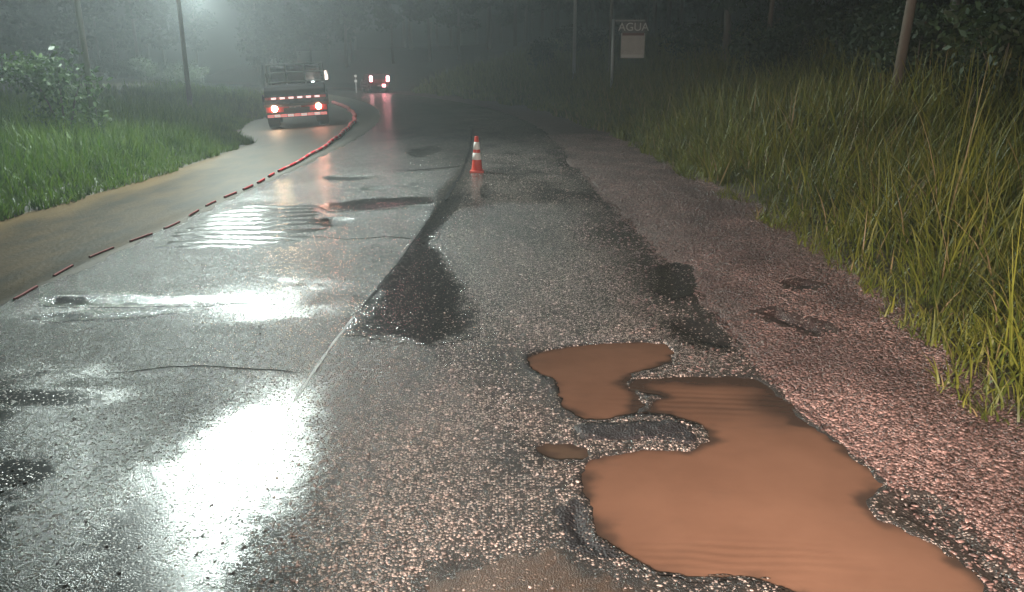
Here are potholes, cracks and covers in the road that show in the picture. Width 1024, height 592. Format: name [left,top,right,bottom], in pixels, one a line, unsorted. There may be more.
pothole [523,339,683,422]
crack [115,365,297,373]
pothole [519,438,594,464]
pothole [573,372,990,592]
